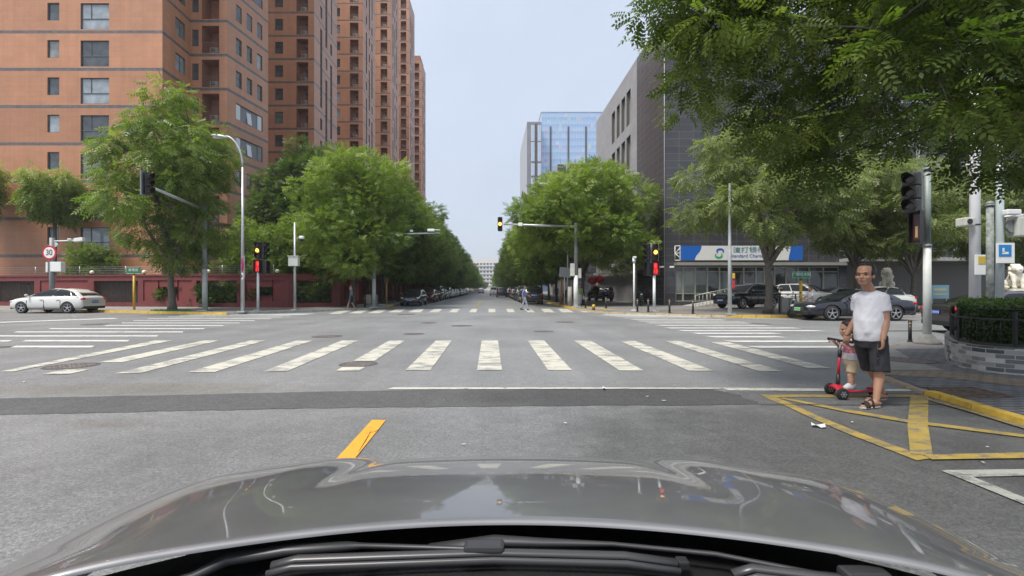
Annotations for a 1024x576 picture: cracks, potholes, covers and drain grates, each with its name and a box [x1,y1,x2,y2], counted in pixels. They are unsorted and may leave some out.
manhole cover [40,362,101,370]
